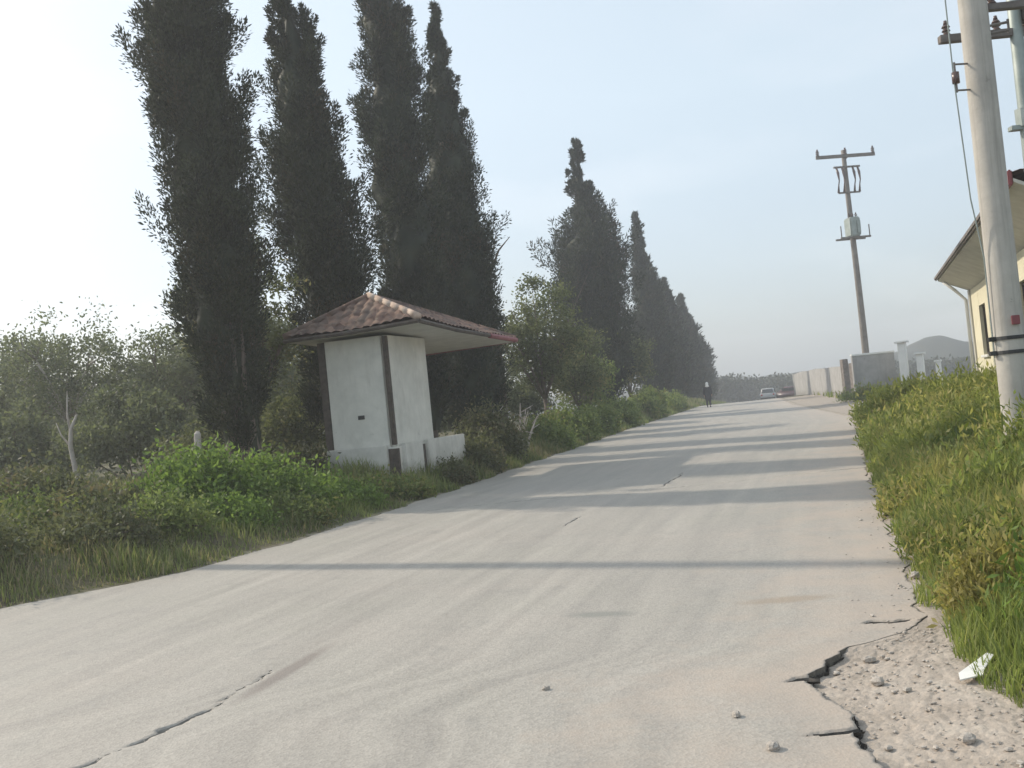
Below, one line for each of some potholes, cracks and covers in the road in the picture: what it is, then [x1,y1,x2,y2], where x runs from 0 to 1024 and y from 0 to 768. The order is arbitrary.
crack [80,670,272,768]
crack [789,657,868,750]
